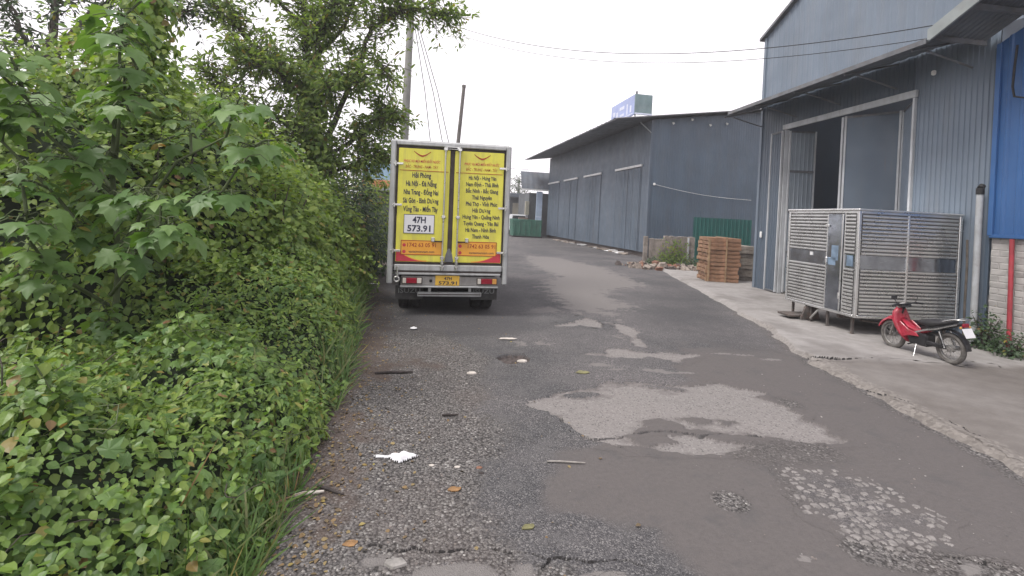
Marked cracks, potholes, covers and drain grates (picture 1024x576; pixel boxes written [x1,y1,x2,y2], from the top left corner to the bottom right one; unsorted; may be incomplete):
pothole [487,353,544,370]
crack [351,536,660,576]
